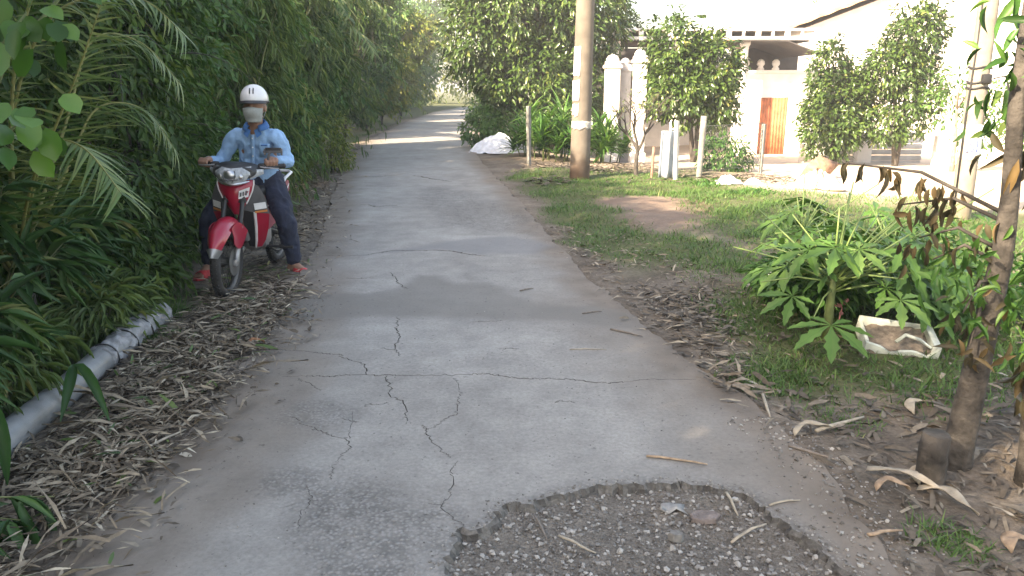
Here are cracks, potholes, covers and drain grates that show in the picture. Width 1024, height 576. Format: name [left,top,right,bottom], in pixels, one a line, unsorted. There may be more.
pothole [420,472,867,576]
crack [283,349,694,526]
